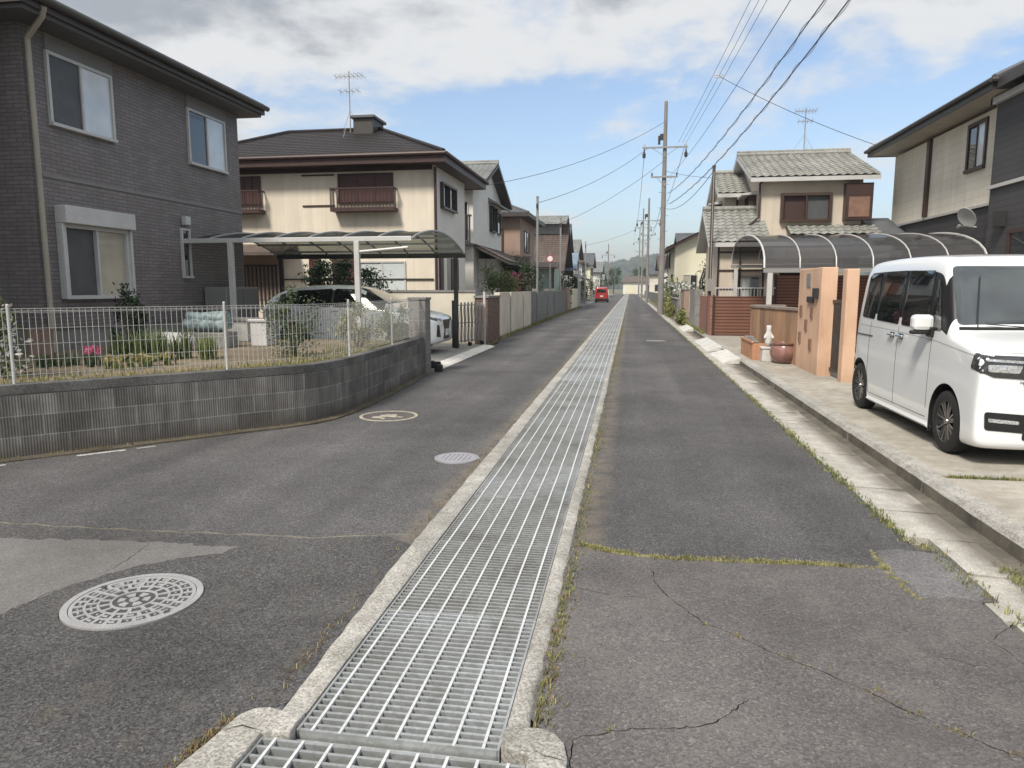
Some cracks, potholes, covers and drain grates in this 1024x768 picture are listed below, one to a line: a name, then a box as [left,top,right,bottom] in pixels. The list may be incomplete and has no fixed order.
drain grate [440,496,570,547]
drain grate [474,464,579,501]
drain grate [554,381,604,391]
drain grate [388,540,557,622]
manhole cover [59,573,204,631]
crack [580,571,1023,758]
drain grate [515,424,591,444]
drain grate [297,609,536,763]
manhole cover [434,452,479,464]
drain grate [548,389,601,399]
drain grate [497,441,586,469]
